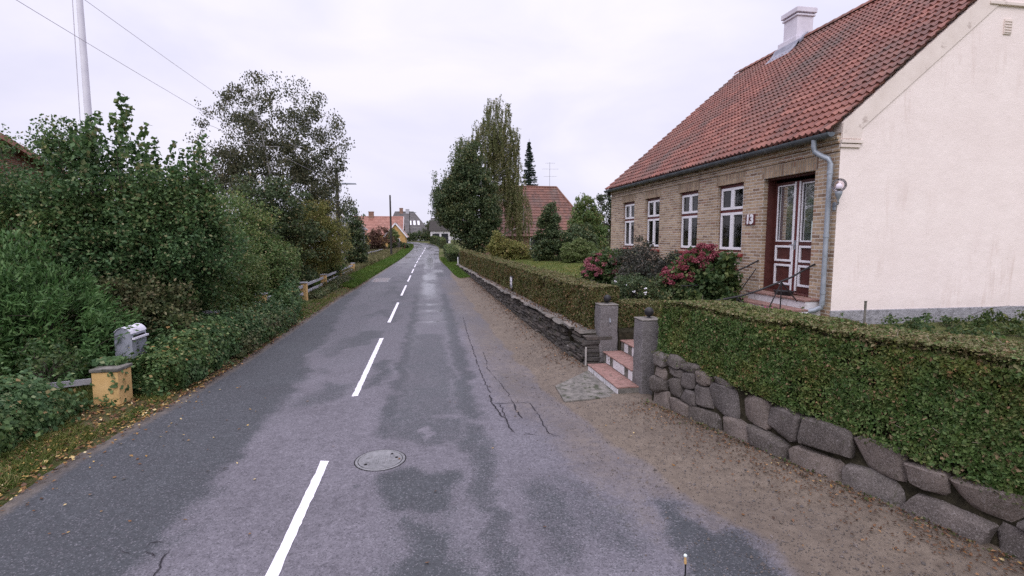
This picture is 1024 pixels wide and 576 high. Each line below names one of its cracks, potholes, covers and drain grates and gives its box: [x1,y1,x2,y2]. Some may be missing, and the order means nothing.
crack [121,541,169,576]
manhole cover [354,449,406,471]
crack [464,321,559,436]
